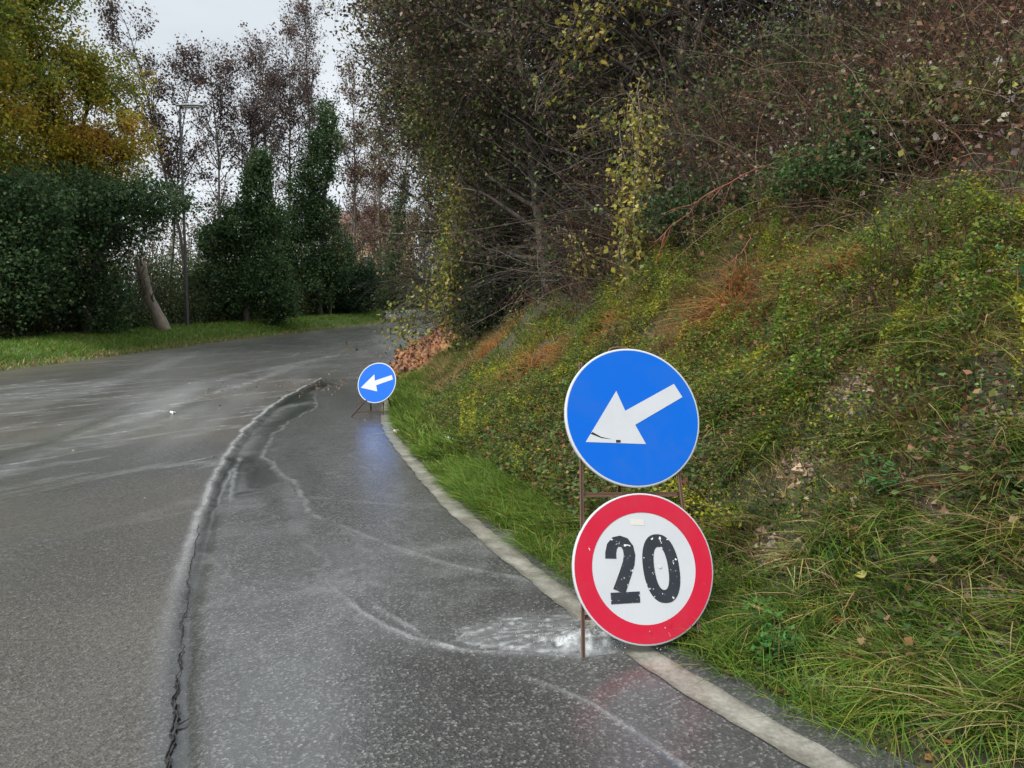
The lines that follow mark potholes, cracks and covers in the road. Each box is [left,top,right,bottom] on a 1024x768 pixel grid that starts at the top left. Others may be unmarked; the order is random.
crack [164,526,199,768]
